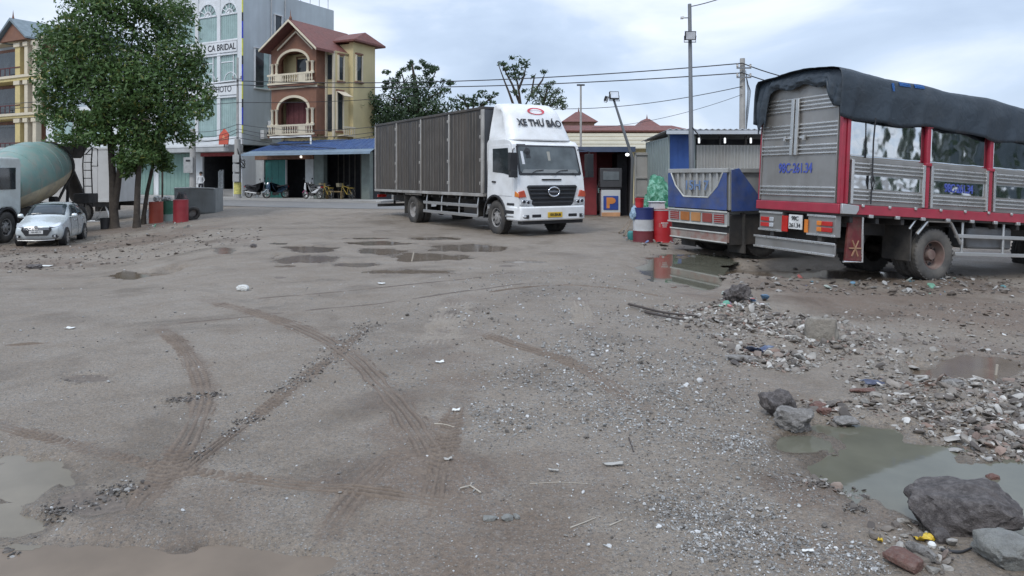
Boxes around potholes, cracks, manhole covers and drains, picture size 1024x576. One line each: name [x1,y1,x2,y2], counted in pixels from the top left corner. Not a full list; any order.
pothole [271,255,338,264]
pothole [0,455,75,551]
pothole [106,271,166,280]
pothole [912,356,1024,382]
pothole [776,432,837,455]
pothole [392,253,474,262]
pothole [428,244,507,252]
pothole [807,424,1024,536]
